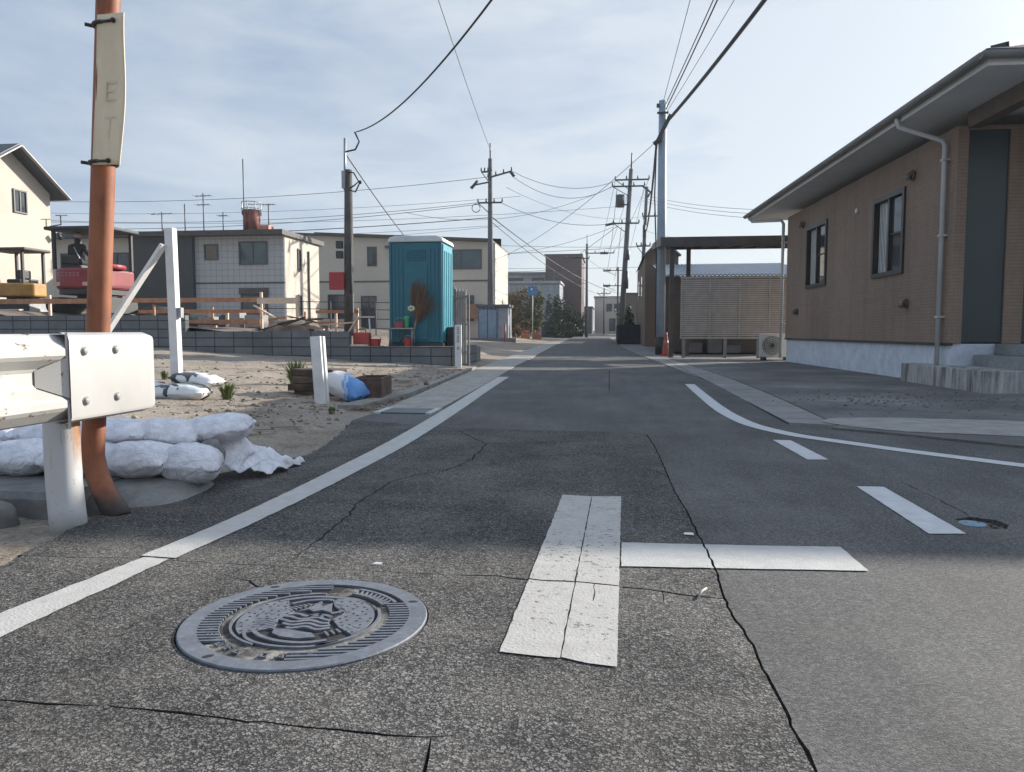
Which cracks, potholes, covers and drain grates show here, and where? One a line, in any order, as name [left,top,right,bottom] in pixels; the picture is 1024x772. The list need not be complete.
manhole cover [959,520,990,528]
crack [0,699,453,772]
manhole cover [174,580,429,674]
crack [18,431,725,601]
